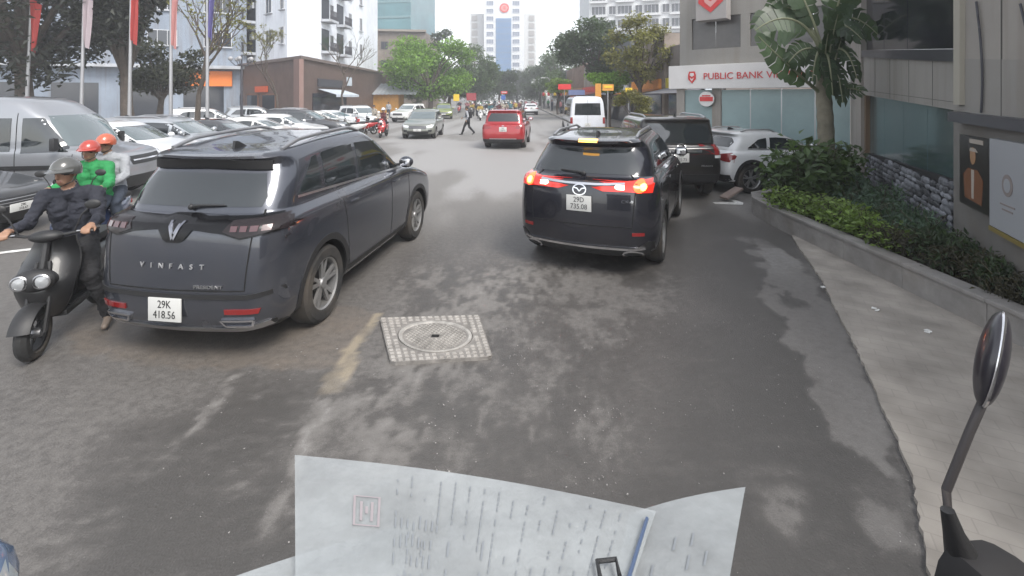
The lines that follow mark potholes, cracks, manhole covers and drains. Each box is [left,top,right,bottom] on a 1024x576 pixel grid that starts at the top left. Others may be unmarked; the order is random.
manhole cover [380,315,492,366]
